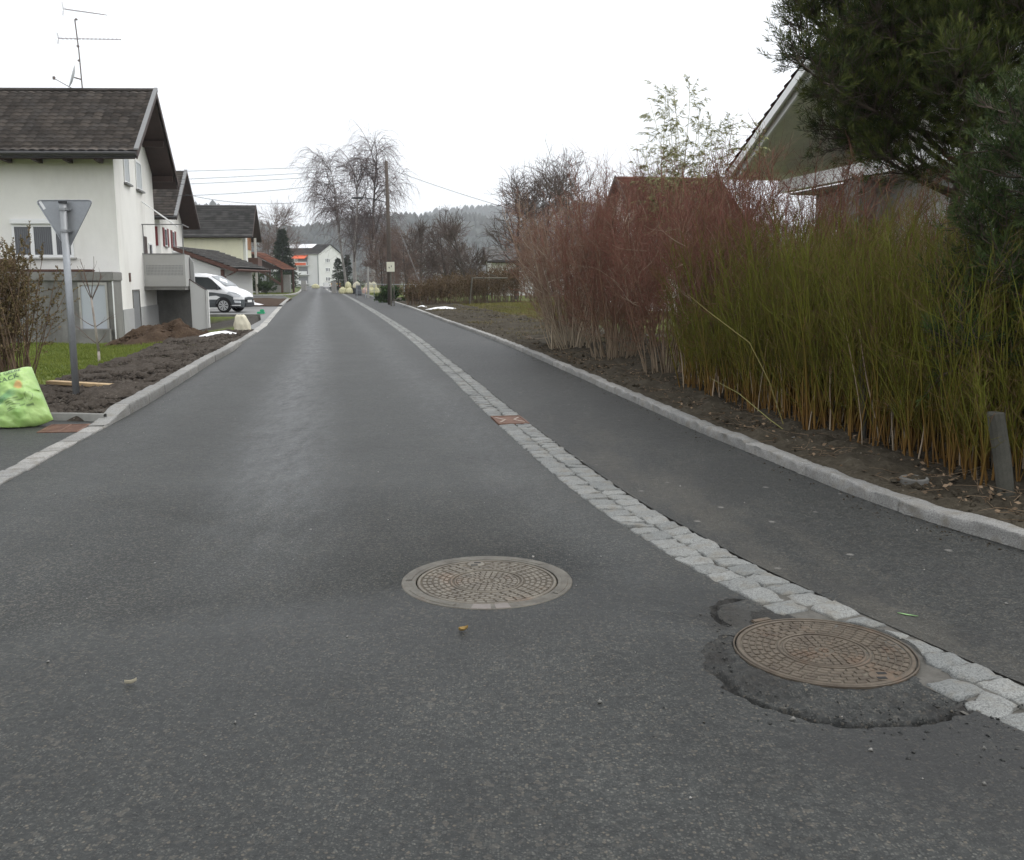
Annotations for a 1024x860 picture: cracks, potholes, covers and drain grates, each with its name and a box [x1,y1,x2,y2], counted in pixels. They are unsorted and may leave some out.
manhole cover [401,556,572,610]
manhole cover [733,618,920,690]
